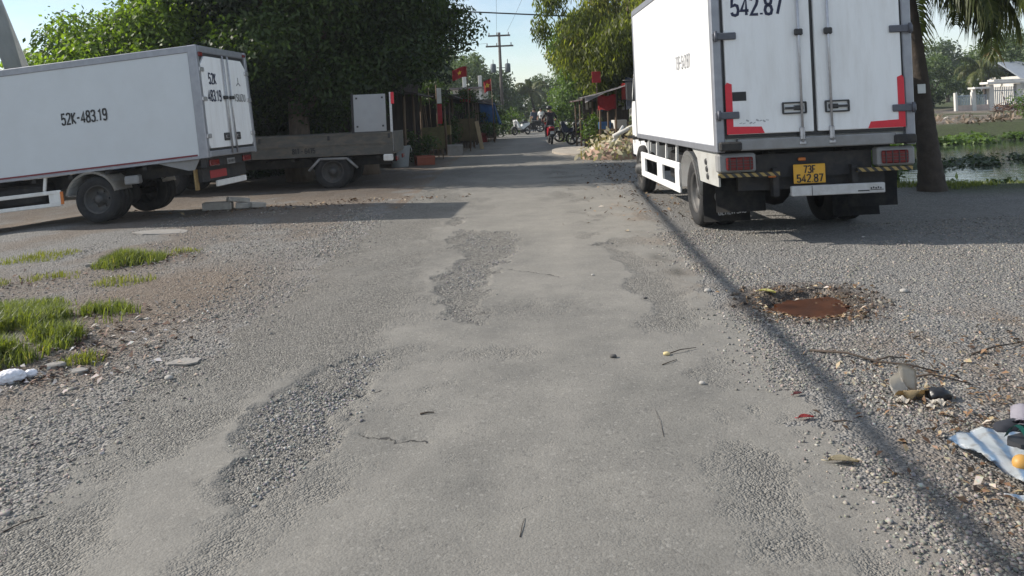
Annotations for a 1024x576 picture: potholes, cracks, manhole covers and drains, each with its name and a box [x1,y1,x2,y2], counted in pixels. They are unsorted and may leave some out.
pothole [197,349,392,520]
crack [359,434,427,444]
pothole [429,229,524,326]
